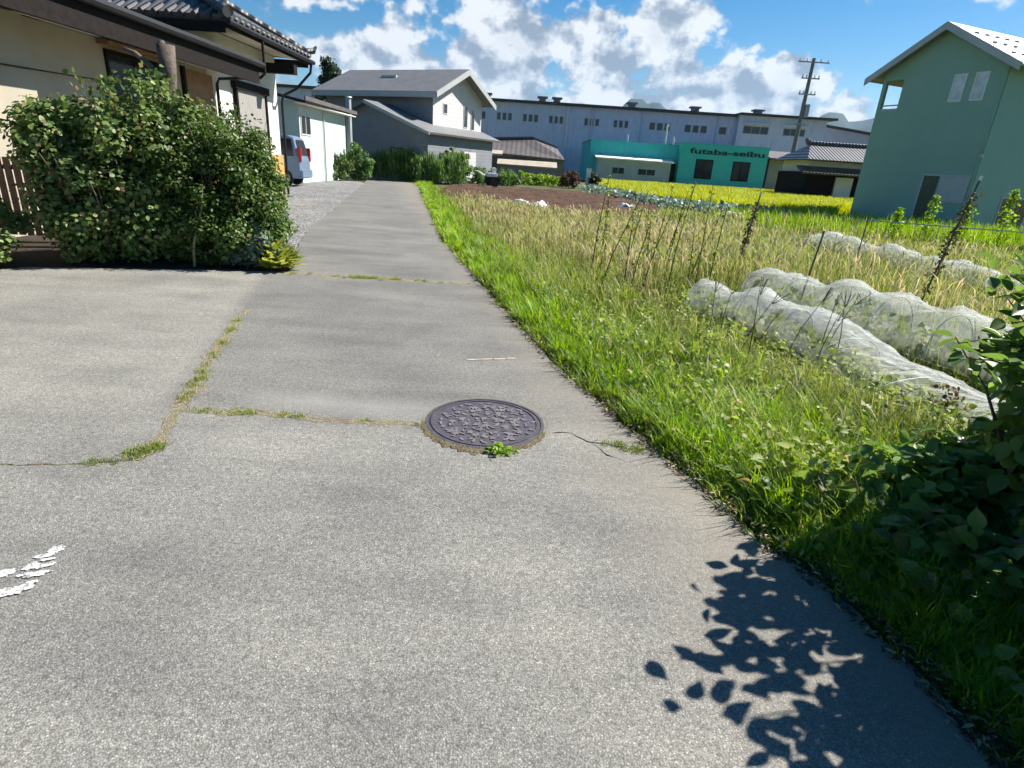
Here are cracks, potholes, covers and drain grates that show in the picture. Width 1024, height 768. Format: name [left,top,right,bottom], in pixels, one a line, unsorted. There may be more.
crack [1,456,133,469]
crack [554,432,650,460]
manhole cover [421,398,547,455]
